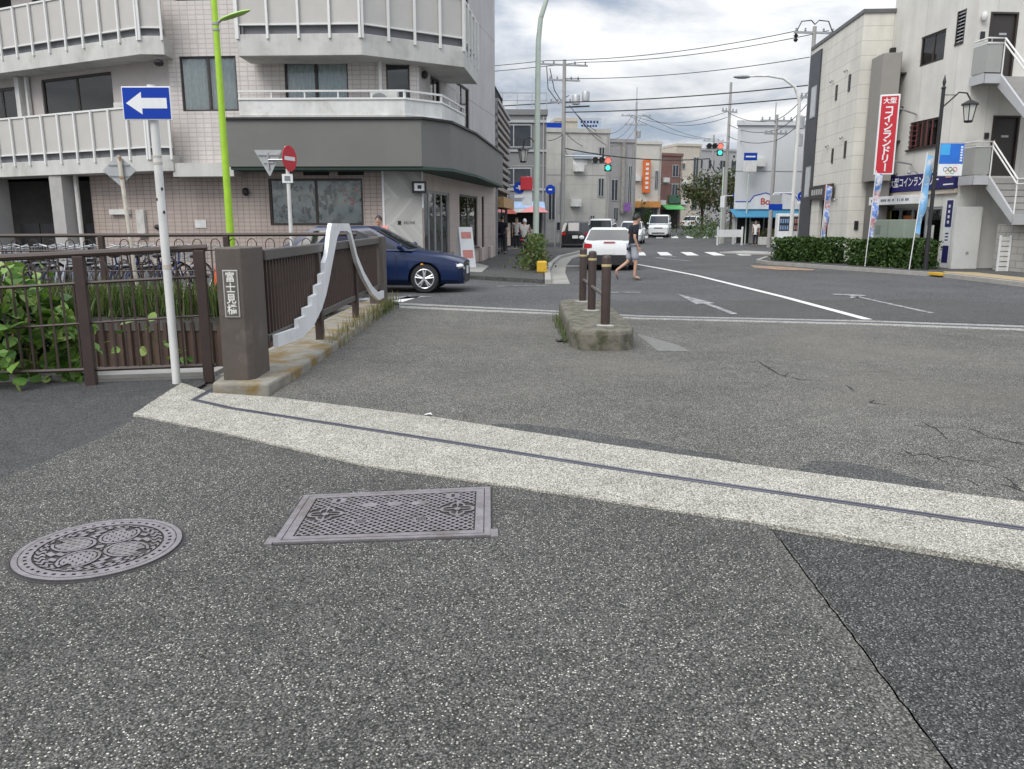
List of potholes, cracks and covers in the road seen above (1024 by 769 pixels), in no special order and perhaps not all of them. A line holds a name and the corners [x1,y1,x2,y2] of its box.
crack [746,361,816,381]
manhole cover [264,486,498,546]
crack [899,421,1024,492]
manhole cover [6,519,186,584]
